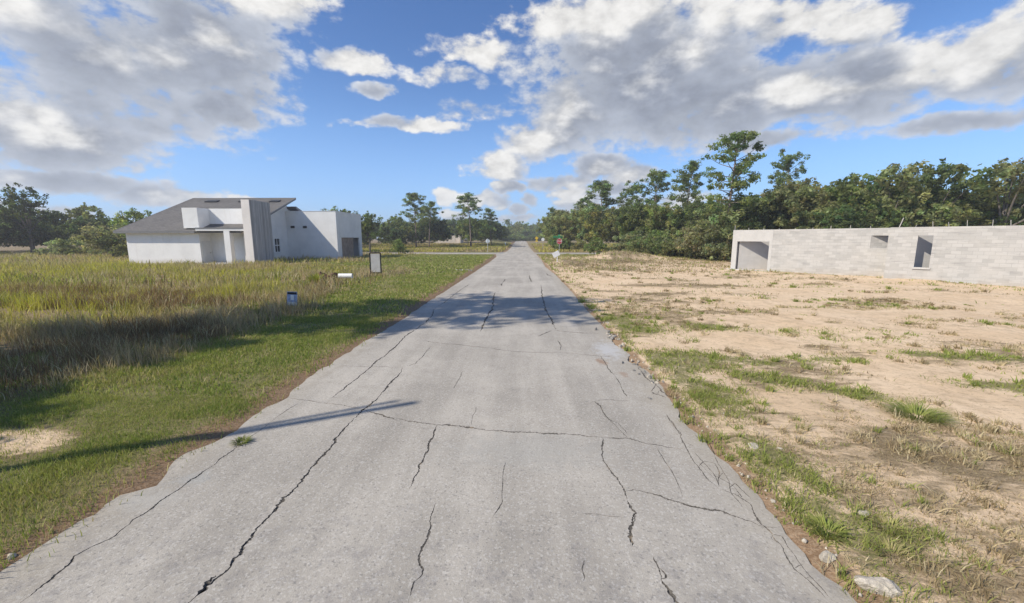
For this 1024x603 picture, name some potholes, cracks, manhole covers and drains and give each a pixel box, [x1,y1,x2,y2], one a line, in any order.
crack [20,273,833,603]
